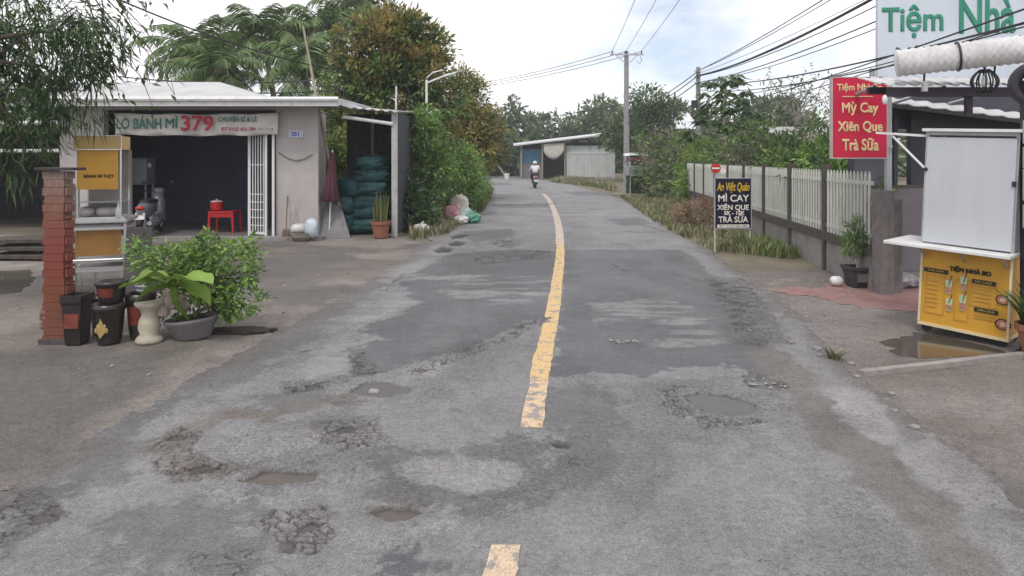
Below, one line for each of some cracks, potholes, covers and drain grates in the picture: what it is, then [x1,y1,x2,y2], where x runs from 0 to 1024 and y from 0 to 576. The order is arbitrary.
pothole [659,383,786,429]
crack [407,317,551,376]
pothole [427,231,493,242]
